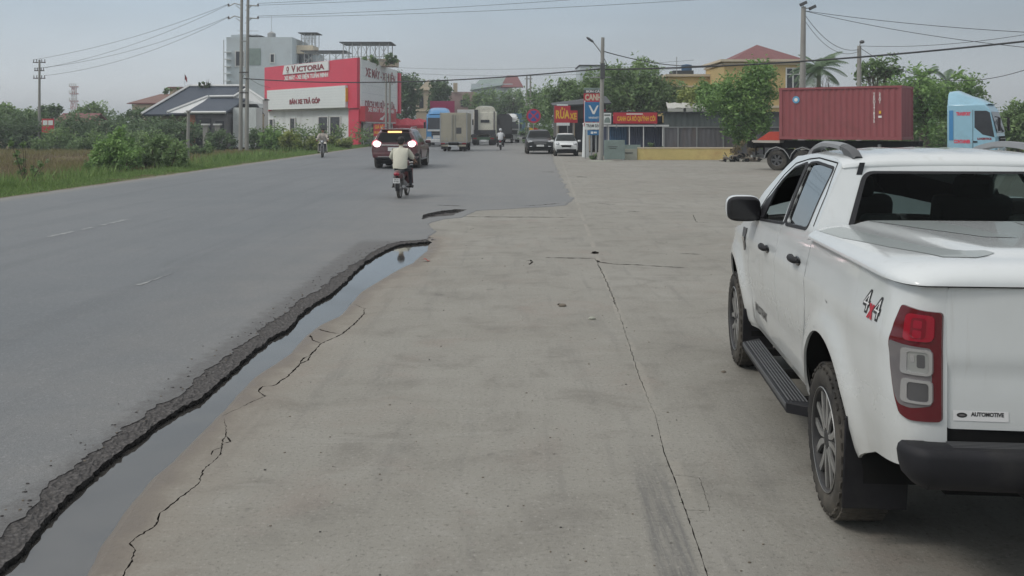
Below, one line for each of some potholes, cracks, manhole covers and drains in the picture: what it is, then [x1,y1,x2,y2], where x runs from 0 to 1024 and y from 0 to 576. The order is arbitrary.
pothole [421,209,467,219]
pothole [0,237,433,576]
crack [123,422,231,576]
crack [528,257,710,576]
crack [225,306,365,415]
